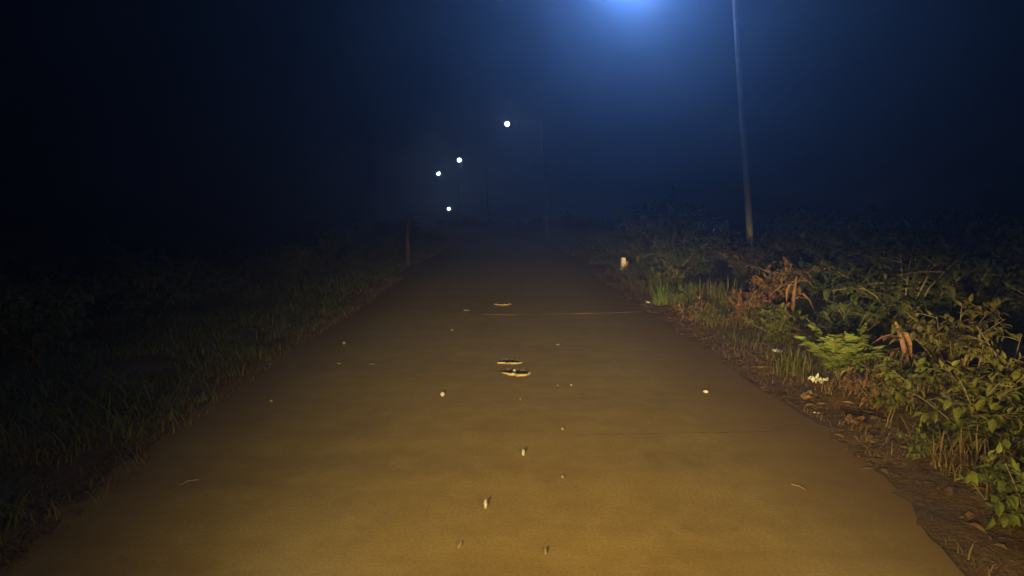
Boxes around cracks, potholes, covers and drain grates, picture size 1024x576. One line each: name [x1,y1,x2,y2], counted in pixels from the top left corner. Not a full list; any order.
pothole [499,367,531,377]
